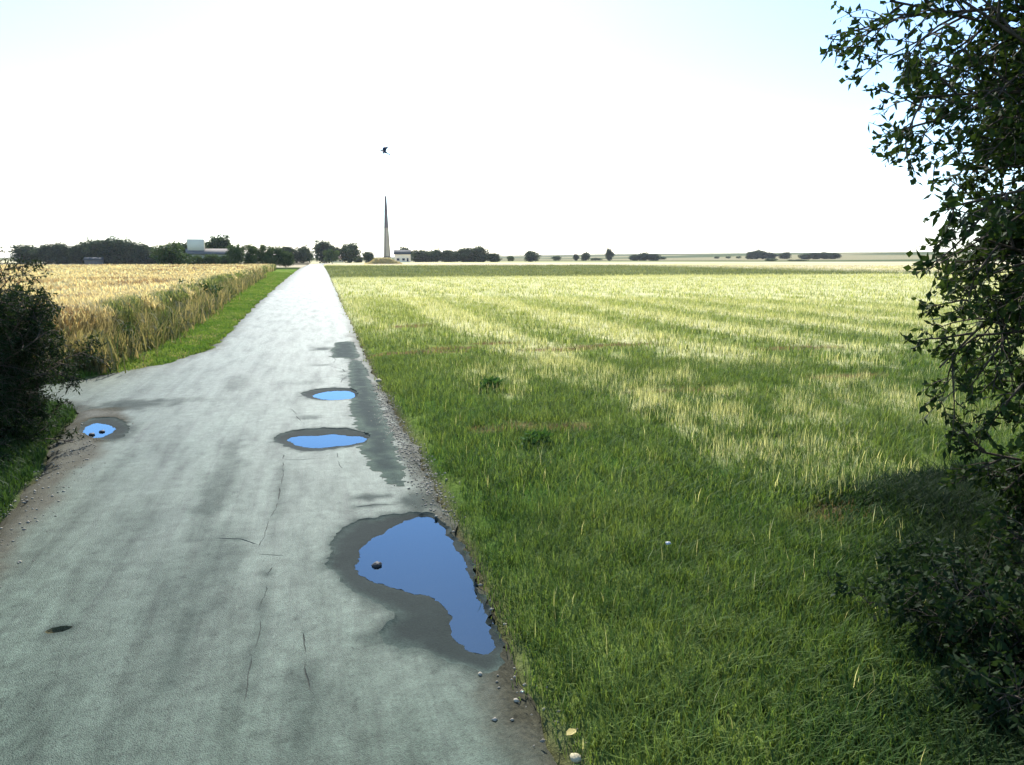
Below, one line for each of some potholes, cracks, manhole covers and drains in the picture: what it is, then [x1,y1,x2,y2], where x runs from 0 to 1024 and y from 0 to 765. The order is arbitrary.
crack [222,455,305,701]
crack [303,633,311,690]
pothole [45,626,72,634]
pothole [324,512,505,673]
pothole [300,387,359,400]
pothole [79,417,130,440]
pothole [273,427,370,451]
